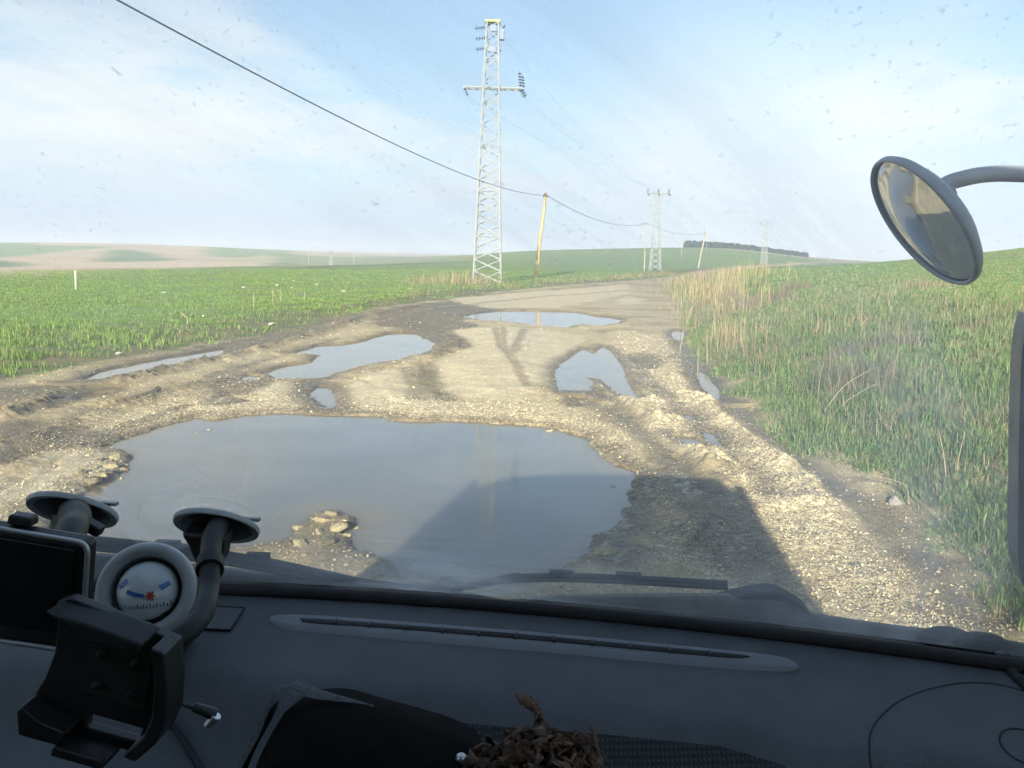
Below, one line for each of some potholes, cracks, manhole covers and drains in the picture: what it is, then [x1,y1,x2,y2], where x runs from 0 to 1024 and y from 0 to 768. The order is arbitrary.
pothole [34,409,646,580]
pothole [454,309,625,328]
pothole [258,331,439,379]
pothole [548,345,646,398]
